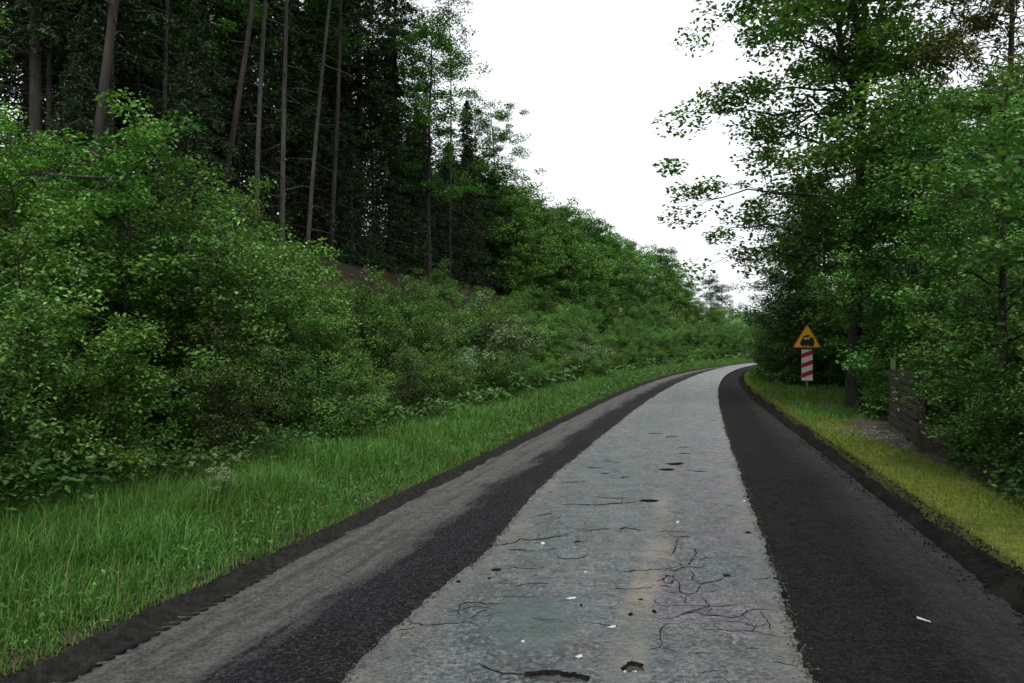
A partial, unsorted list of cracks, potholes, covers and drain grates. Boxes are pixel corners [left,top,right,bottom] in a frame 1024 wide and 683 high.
crack [611,531,796,674]
crack [397,533,588,637]
pothole [523,670,590,683]
pothole [620,661,645,673]
